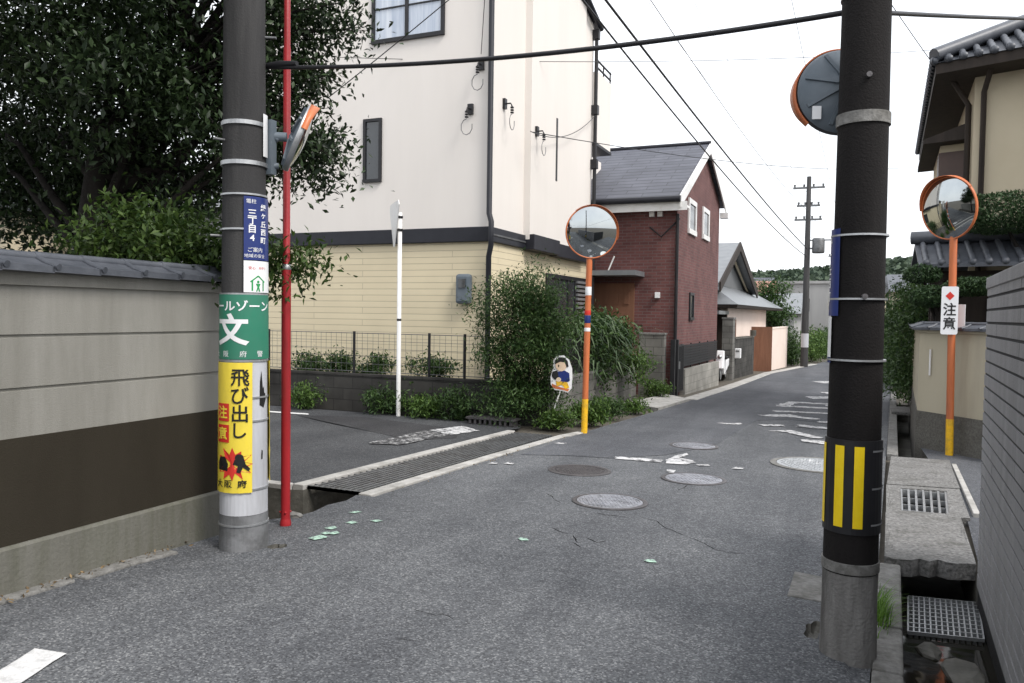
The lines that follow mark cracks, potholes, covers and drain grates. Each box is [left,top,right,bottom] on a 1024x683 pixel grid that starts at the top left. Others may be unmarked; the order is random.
manhole cover [669,442,719,450]
drain grate [307,432,552,495]
drain grate [907,595,985,642]
manhole cover [661,473,727,486]
manhole cover [572,493,648,511]
drain grate [901,489,949,514]
manhole cover [548,464,611,477]
manhole cover [770,457,824,474]
